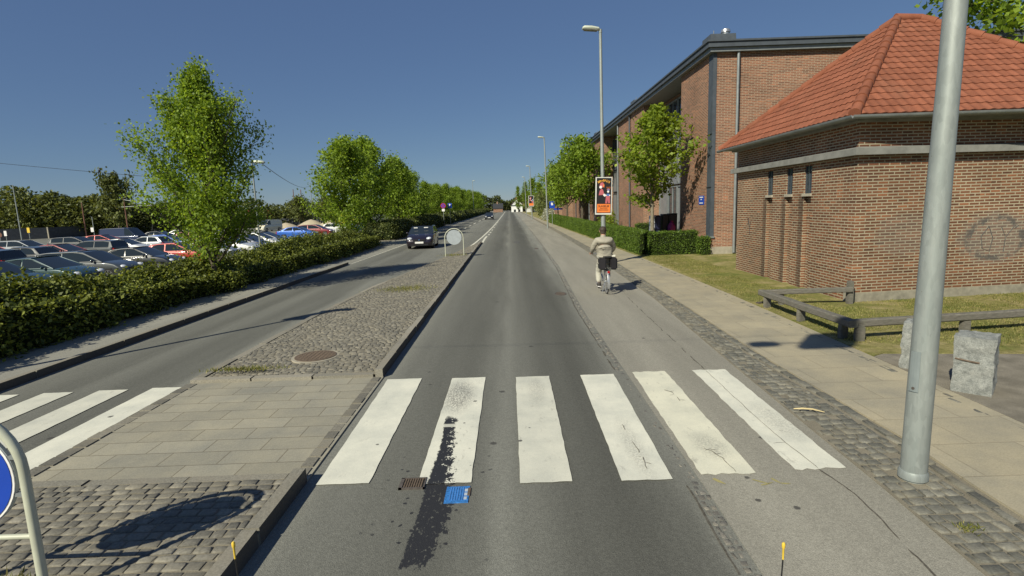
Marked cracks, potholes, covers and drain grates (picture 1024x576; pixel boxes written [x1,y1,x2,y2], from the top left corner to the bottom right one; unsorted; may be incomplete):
manhole cover [291,350,340,364]
drain grate [398,477,427,490]
